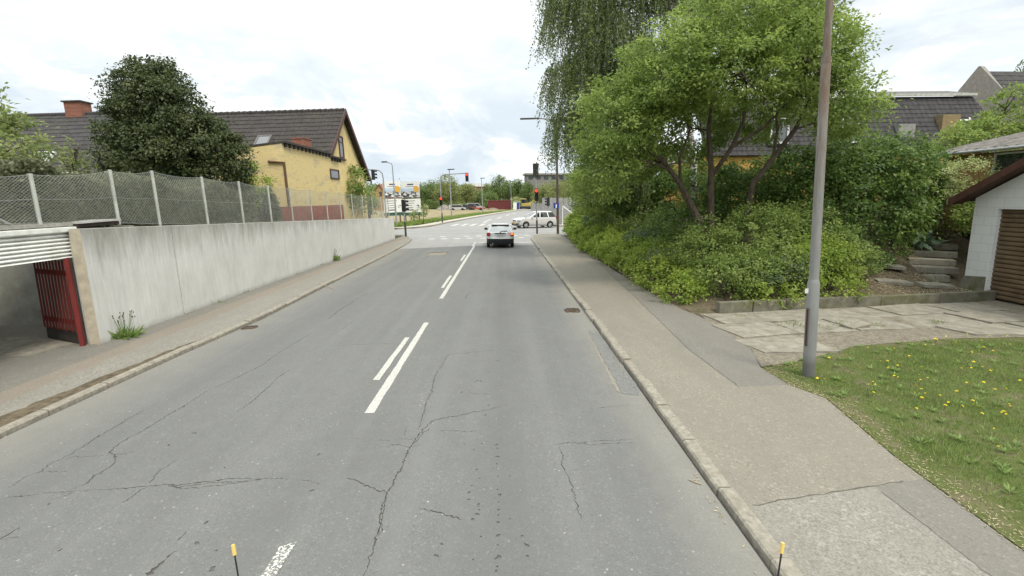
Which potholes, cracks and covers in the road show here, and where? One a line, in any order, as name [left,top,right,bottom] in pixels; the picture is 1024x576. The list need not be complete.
crack [12,331,314,501]
crack [145,532,186,576]
crack [348,350,499,576]
